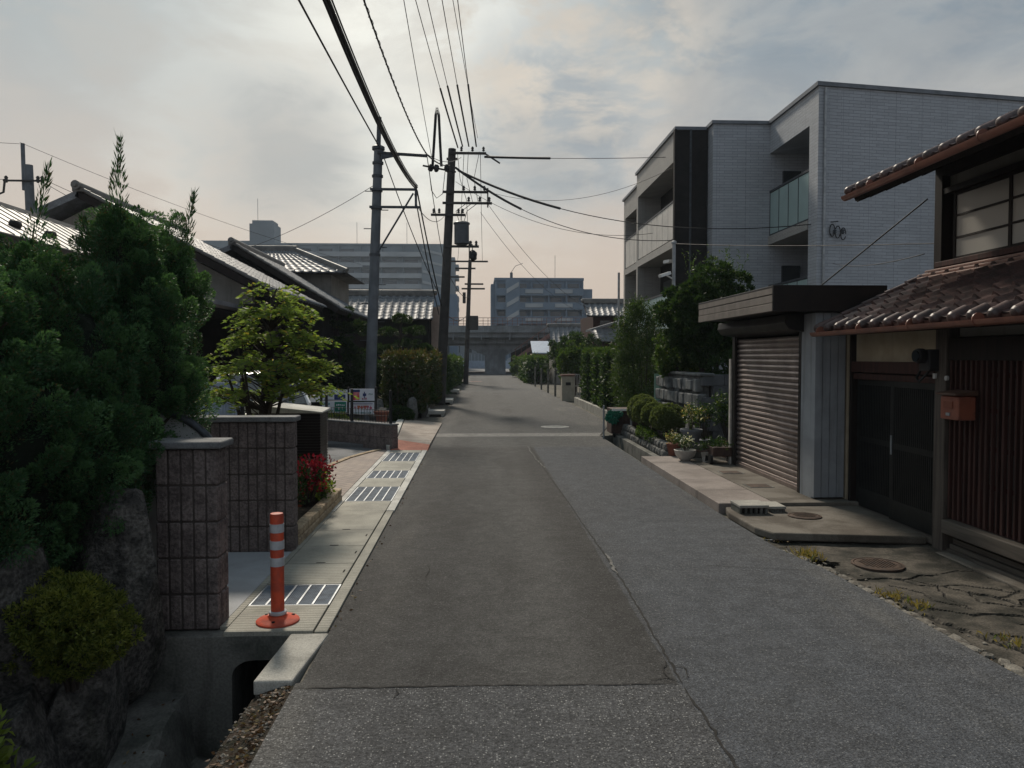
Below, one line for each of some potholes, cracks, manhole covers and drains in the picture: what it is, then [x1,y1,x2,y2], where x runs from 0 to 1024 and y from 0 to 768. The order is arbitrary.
manhole cover [851,557,905,573]
crack [898,571,1024,654]
drain grate [345,487,400,502]
manhole cover [787,512,822,520]
drain grate [248,584,341,608]
drain grate [367,470,410,478]
drain grate [382,453,420,462]
